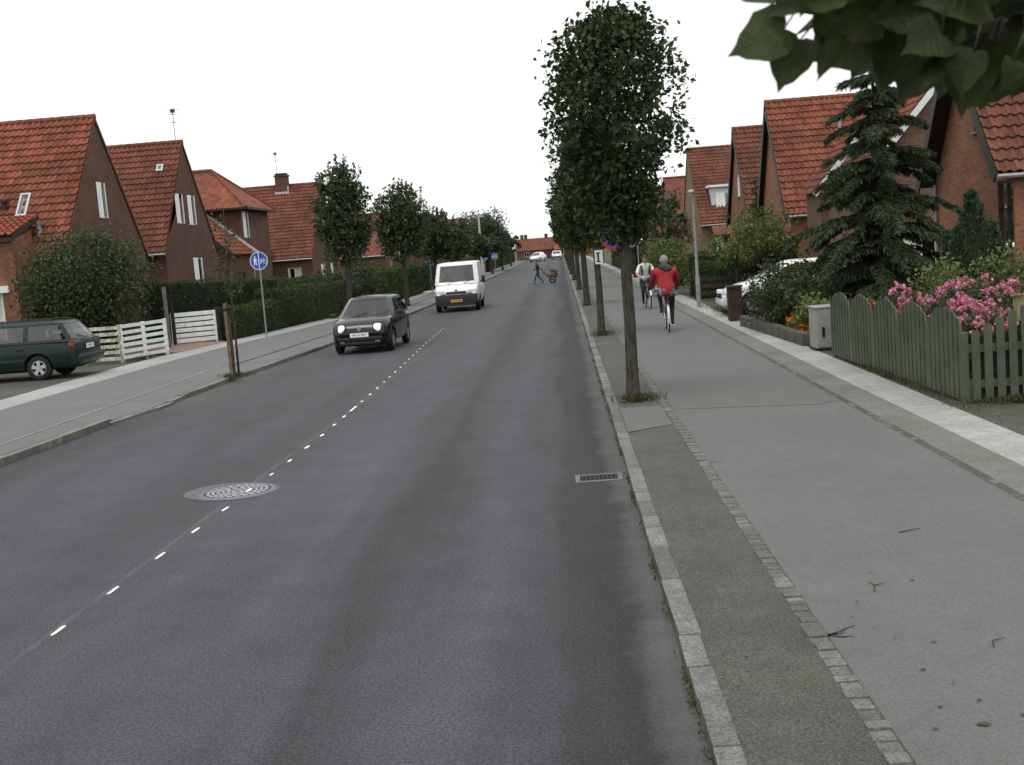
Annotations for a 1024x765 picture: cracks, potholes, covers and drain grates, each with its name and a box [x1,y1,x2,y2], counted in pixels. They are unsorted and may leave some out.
drain grate [575,472,623,483]
manhole cover [183,482,281,501]
